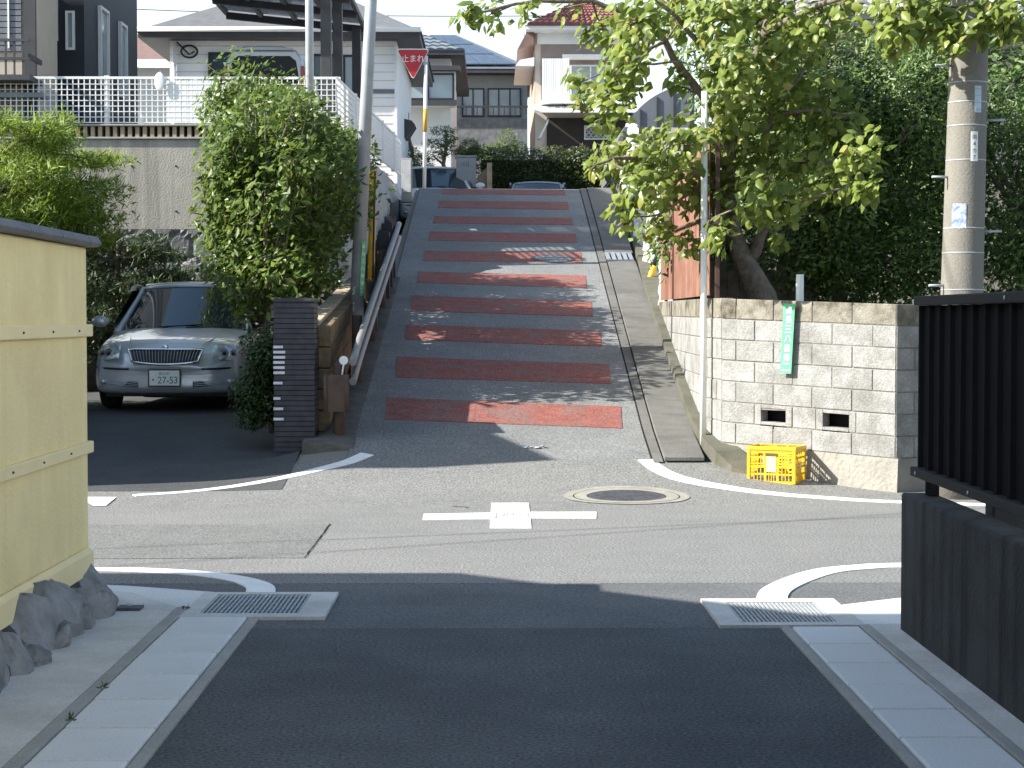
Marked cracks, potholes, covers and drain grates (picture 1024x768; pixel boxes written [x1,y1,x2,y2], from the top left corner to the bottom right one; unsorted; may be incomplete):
manhole cover [563,486,690,504]
drain grate [178,592,339,620]
drain grate [701,598,864,628]
utility cover [116,603,144,611]
drain grate [604,252,635,261]
